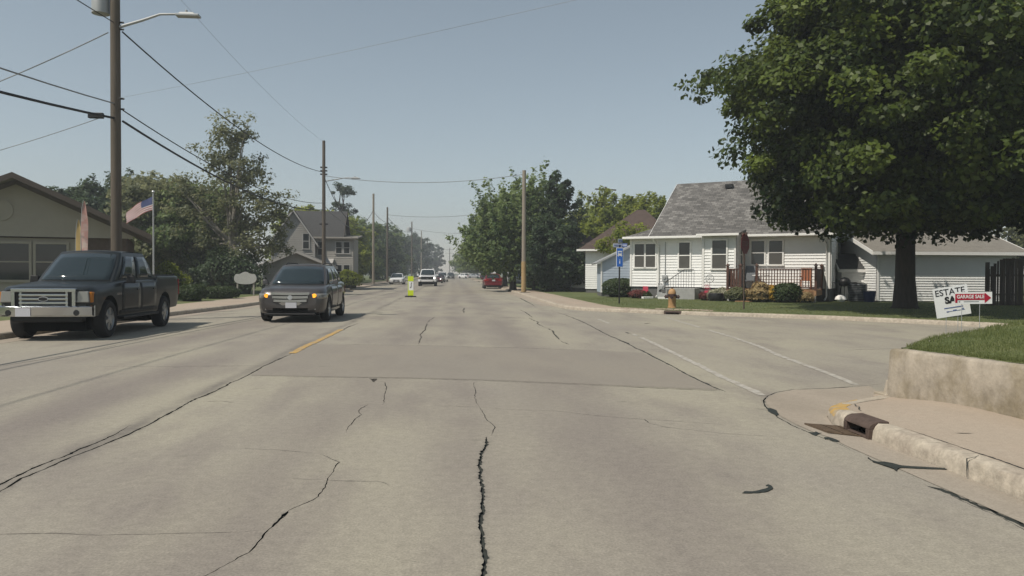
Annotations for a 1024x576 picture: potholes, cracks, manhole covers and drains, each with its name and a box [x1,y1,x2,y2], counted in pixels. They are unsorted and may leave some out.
crack [24,448,384,576]
drain grate [804,413,889,440]
crack [458,383,798,576]
